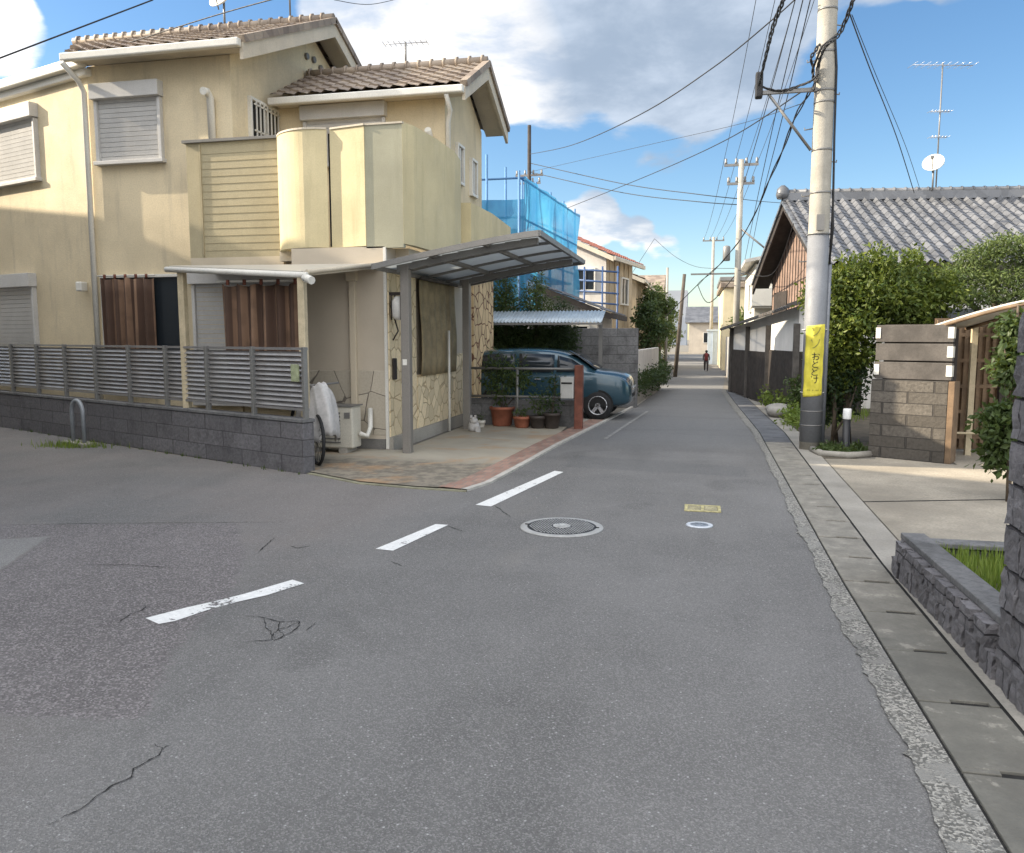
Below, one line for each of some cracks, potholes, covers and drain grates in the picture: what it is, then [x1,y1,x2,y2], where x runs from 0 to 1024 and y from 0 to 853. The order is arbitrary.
manhole cover [520,517,604,538]
crack [243,615,314,643]
utility cover [686,521,713,529]
crack [50,744,169,824]
